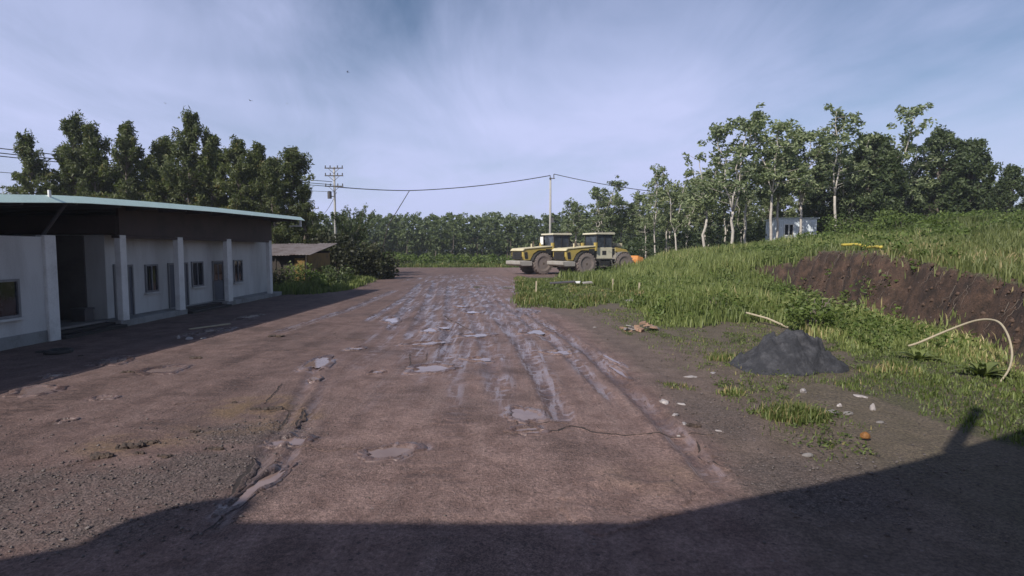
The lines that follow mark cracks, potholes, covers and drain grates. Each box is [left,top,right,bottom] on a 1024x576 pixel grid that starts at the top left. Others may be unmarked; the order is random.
pothole [403,362,464,375]
pothole [296,355,336,373]
pothole [357,442,428,462]
crack [516,420,732,472]
pothole [135,364,193,376]
pothole [503,405,551,424]
pothole [210,462,298,518]
